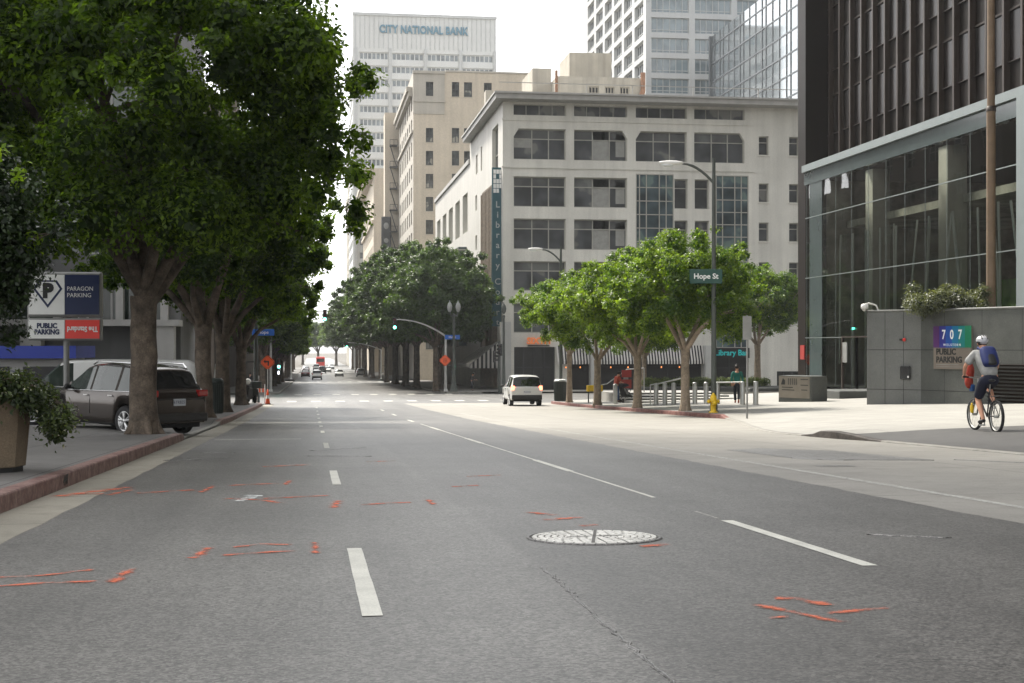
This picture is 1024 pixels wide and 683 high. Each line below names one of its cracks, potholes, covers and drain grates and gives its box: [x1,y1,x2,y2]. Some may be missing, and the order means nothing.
manhole cover [526,530,662,545]
crack [537,565,676,683]
